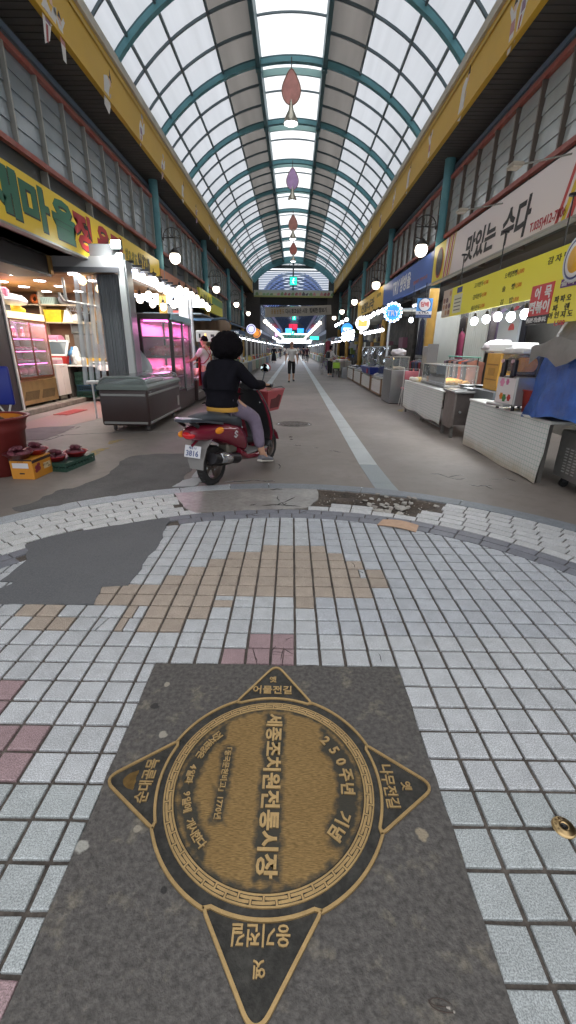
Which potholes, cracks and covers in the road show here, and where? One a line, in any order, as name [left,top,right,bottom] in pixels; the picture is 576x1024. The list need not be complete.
pothole [307,489,439,519]
crack [230,464,308,516]
